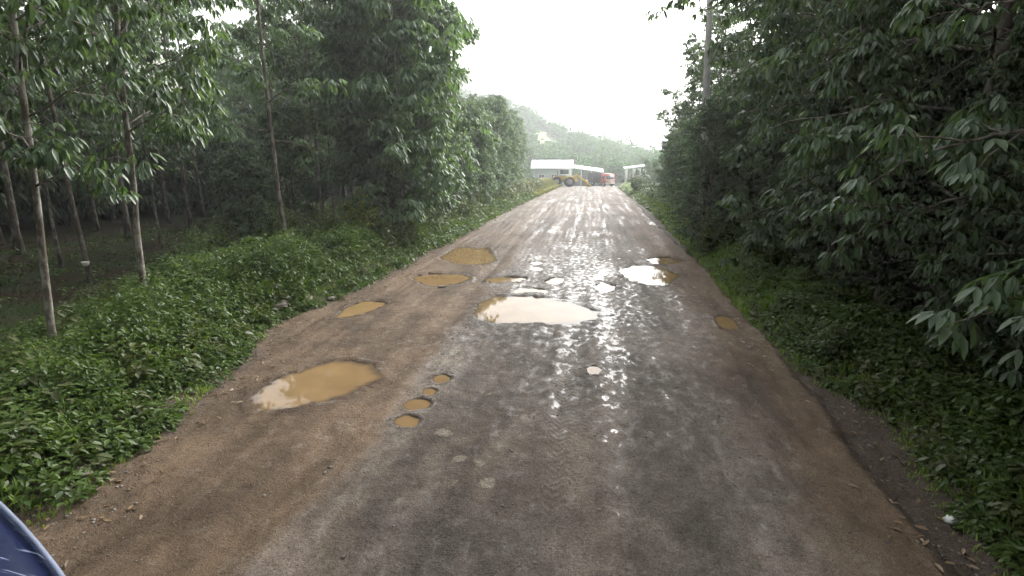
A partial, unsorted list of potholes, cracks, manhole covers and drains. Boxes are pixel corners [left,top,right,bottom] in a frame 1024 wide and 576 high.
pothole [417,385,443,400]
pothole [428,372,456,385]
pothole [581,363,607,377]
pothole [434,245,503,267]
pothole [328,299,391,320]
pothole [462,292,619,327]
pothole [396,394,437,412]
pothole [480,275,532,284]
pothole [711,314,743,331]
pothole [405,271,478,287]
pothole [387,411,426,430]
pothole [612,264,688,288]
